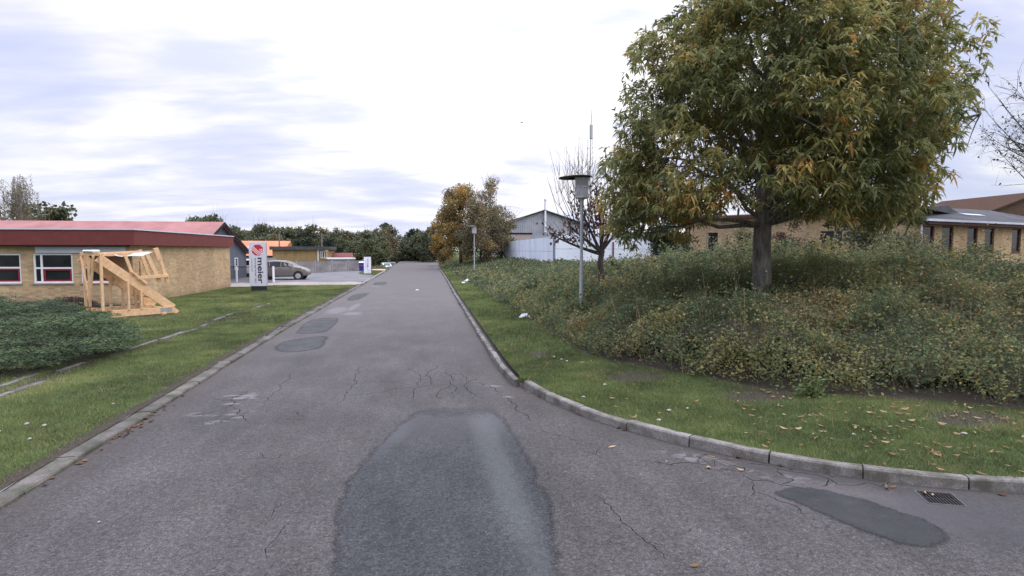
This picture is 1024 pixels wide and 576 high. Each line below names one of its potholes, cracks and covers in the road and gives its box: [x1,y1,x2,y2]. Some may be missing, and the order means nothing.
drain grate [914,490,968,507]
crack [337,366,530,420]
crack [598,496,670,562]
crack [646,457,888,517]
